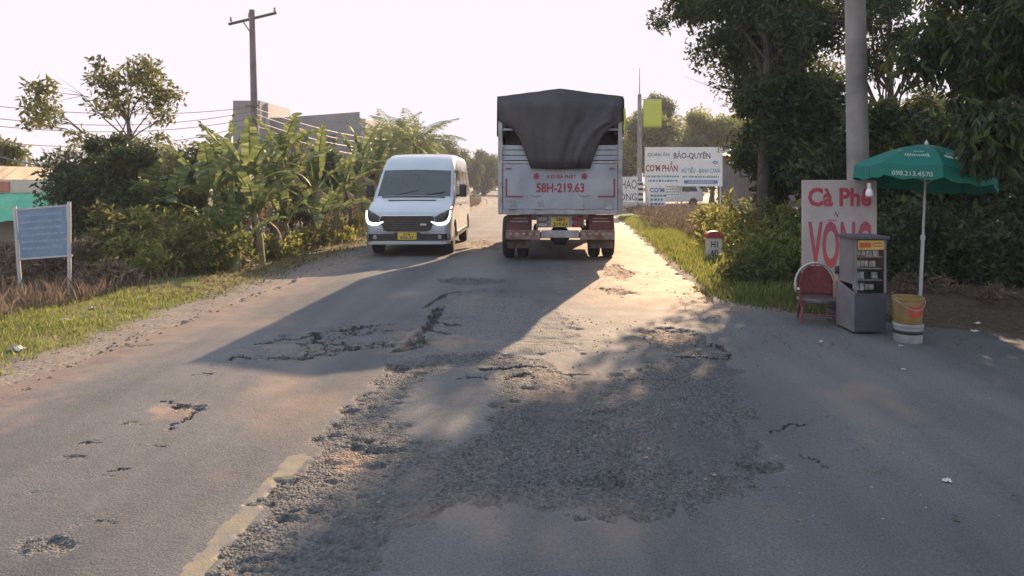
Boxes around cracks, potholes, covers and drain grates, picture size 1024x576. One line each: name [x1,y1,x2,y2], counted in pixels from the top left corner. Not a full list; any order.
pothole [636,326,713,355]
pothole [734,461,786,474]
crack [229,306,462,361]
pothole [599,264,639,280]
pothole [598,287,637,296]
crack [770,423,808,433]
pothole [21,533,77,554]
pothole [204,345,765,576]
pothole [170,404,208,412]
